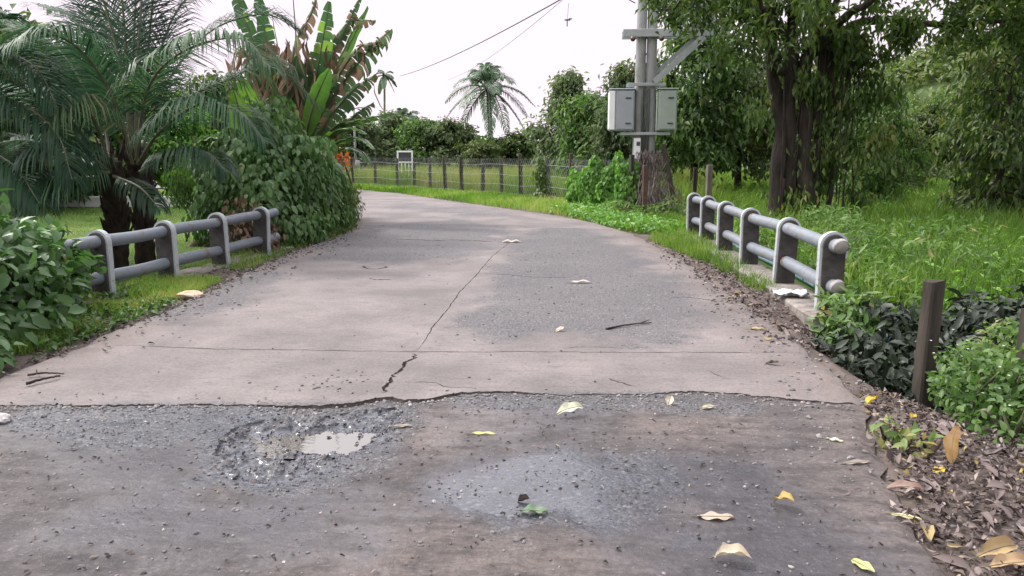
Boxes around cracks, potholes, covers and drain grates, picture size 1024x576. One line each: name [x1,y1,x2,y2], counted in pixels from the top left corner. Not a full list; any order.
crack [0,239,853,410]
pothole [214,406,404,484]
